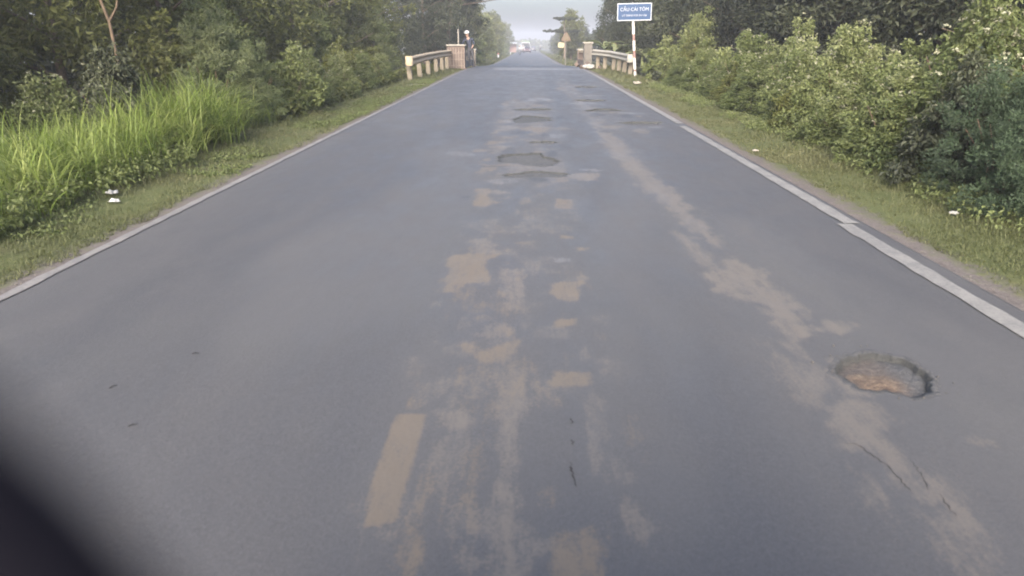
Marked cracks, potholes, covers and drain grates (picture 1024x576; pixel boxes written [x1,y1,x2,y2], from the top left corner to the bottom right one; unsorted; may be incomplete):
pothole [825,349,942,402]
pothole [495,152,563,167]
pothole [509,115,554,124]
crack [844,443,956,515]
